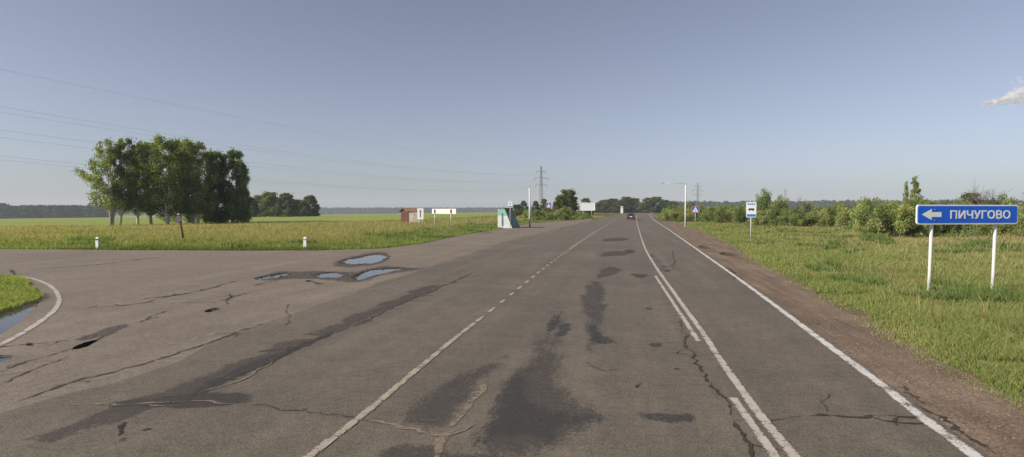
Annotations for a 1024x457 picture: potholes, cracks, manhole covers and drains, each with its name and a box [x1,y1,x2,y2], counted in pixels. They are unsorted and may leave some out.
crack [656,295,995,457]
pothole [347,267,405,281]
pothole [337,253,391,265]
crack [61,360,274,406]
crack [75,272,309,322]
crack [0,334,109,383]
